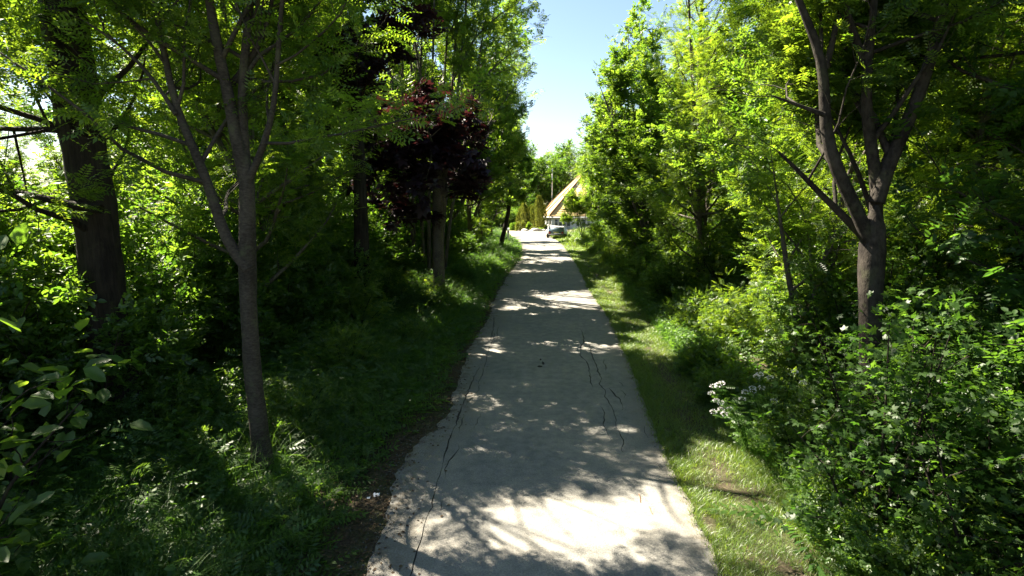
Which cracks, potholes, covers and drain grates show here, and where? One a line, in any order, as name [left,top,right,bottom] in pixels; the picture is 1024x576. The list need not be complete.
crack [579,332,626,450]
crack [410,316,498,576]
